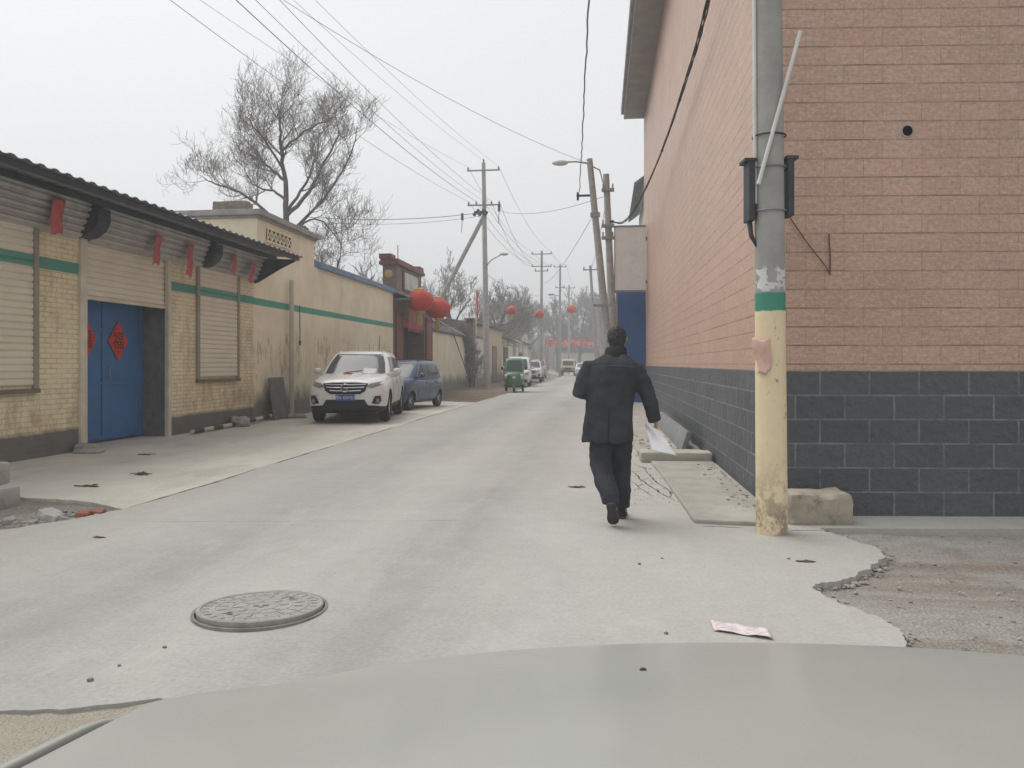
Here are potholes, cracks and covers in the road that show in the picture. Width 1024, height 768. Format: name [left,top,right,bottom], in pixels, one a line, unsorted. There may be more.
manhole cover [190,591,328,633]
pothole [821,533,1024,656]
